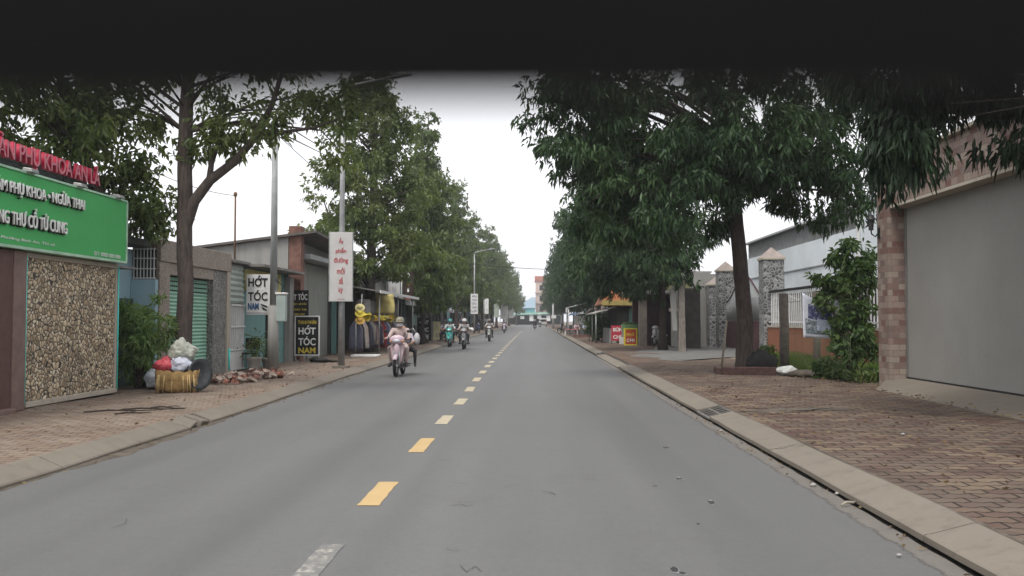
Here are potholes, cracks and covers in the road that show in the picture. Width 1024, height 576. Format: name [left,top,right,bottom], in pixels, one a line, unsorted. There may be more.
drain grate [697,405,732,420]
